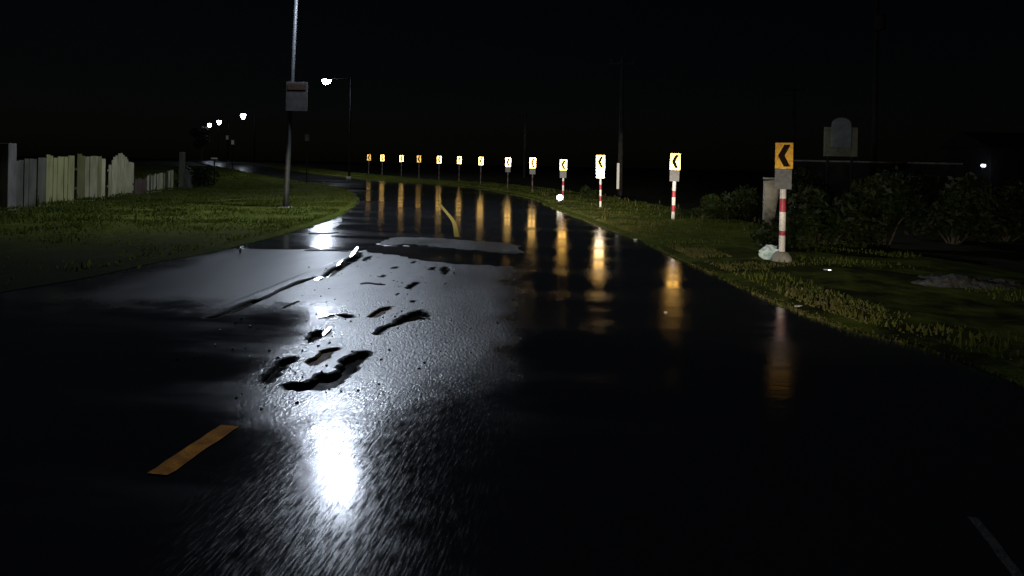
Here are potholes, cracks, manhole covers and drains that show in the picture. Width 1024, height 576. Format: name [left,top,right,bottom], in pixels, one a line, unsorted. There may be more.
pothole [367,306,394,318]
pothole [255,356,300,385]
pothole [303,347,341,366]
pothole [371,309,432,335]
pothole [277,350,374,392]
